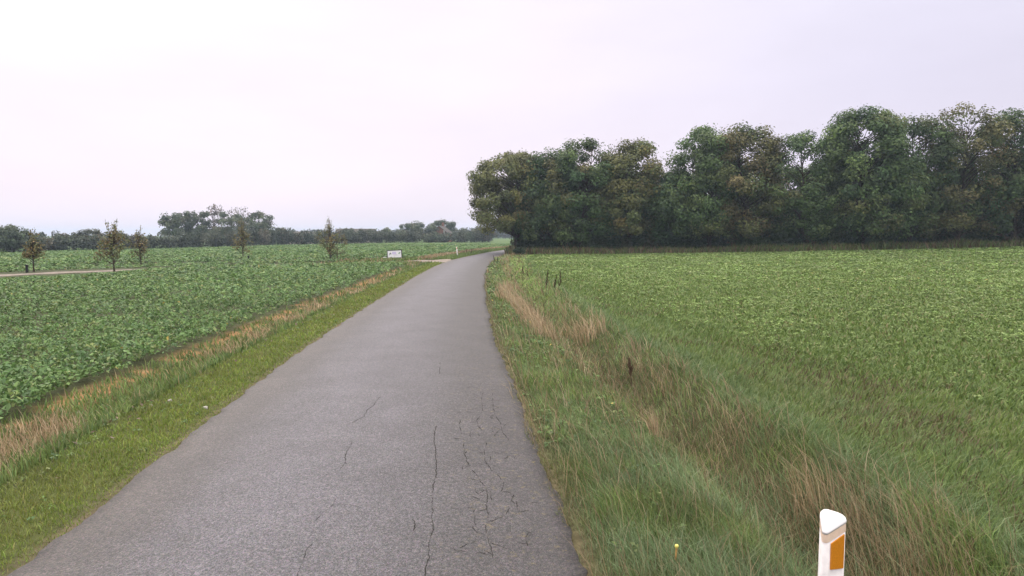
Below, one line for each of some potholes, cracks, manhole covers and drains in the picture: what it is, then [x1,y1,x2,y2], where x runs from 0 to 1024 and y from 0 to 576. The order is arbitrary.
crack [450,387,536,558]
crack [412,426,437,576]
